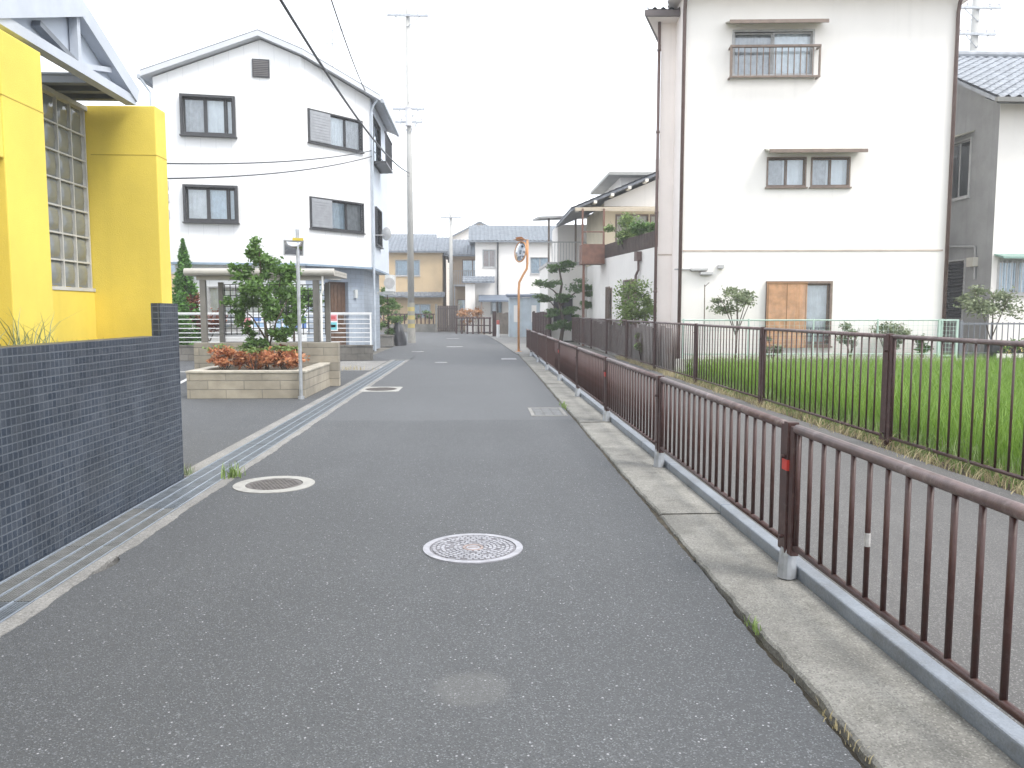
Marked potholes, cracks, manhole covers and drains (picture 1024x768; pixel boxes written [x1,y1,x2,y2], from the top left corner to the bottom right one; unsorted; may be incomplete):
manhole cover [423,533,523,564]
manhole cover [233,476,315,493]
